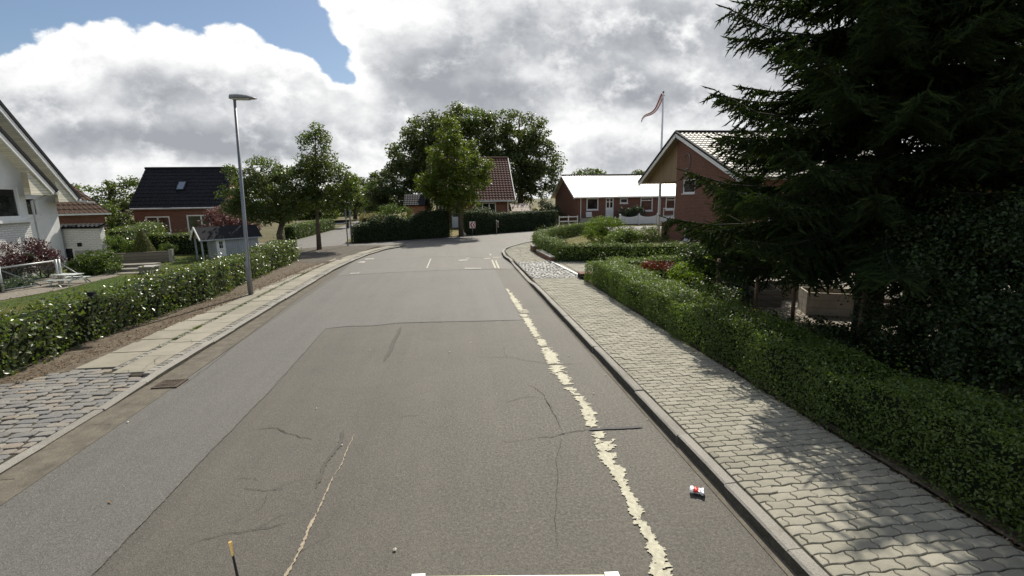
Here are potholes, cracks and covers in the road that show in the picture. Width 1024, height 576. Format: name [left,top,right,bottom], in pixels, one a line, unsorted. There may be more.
crack [503,385,588,540]
drain grate [151,378,189,389]
crack [193,435,354,576]
